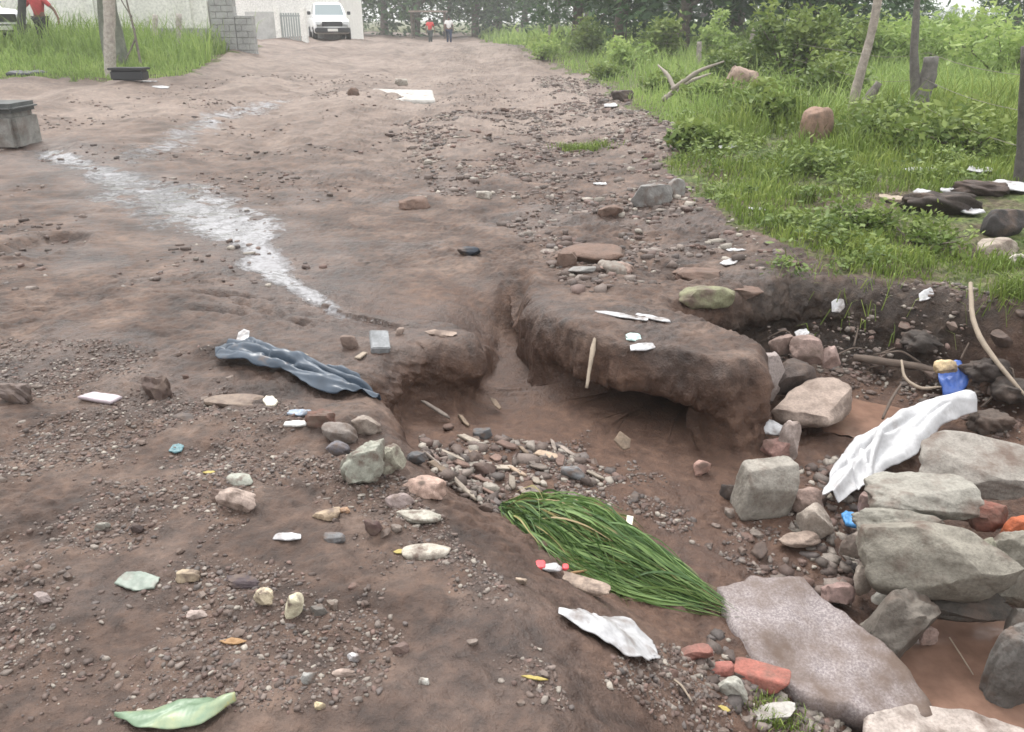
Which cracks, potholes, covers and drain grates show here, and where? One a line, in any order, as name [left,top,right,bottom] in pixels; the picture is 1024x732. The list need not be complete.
pothole [0,231,94,258]
pothole [323,262,797,505]
